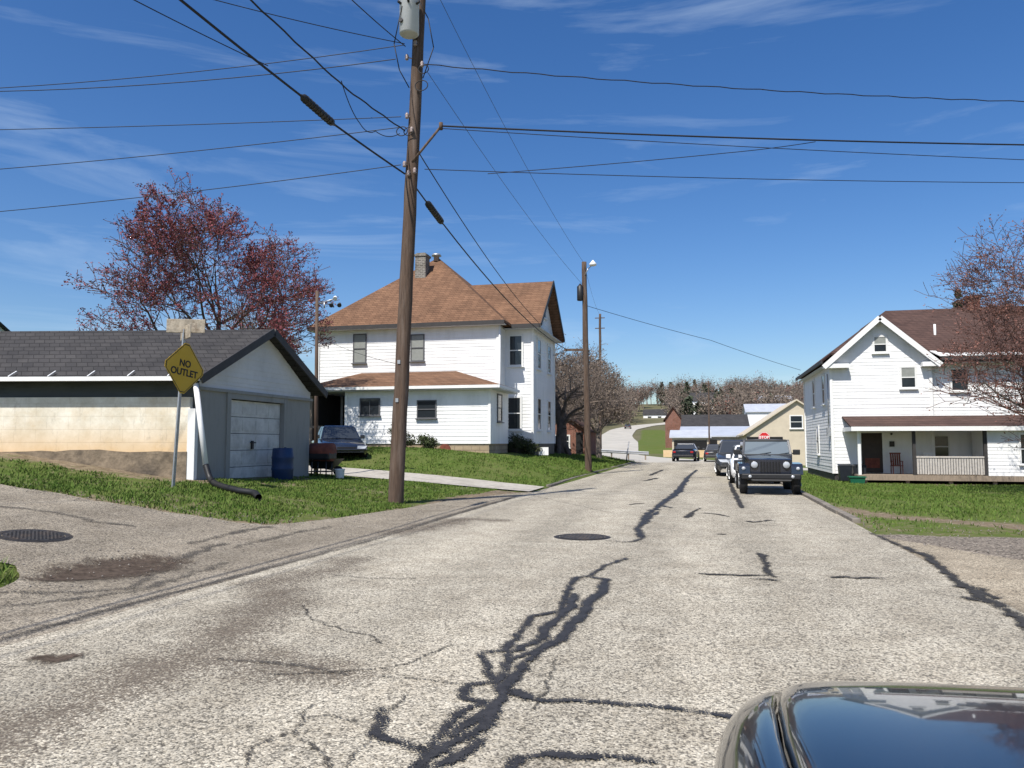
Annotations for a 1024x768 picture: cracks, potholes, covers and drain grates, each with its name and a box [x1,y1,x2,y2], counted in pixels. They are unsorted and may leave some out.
crack [302,605,382,644]
manhole cover [0,529,73,542]
crack [518,655,556,708]
crack [547,481,866,530]
